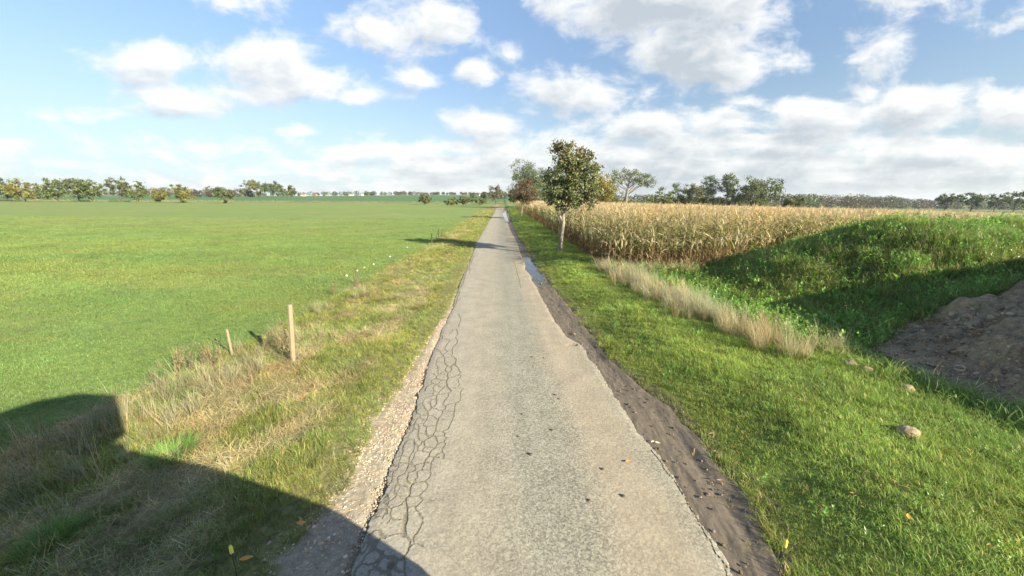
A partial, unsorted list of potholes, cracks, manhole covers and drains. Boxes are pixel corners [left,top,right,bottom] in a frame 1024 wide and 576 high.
crack [352,256,474,576]
